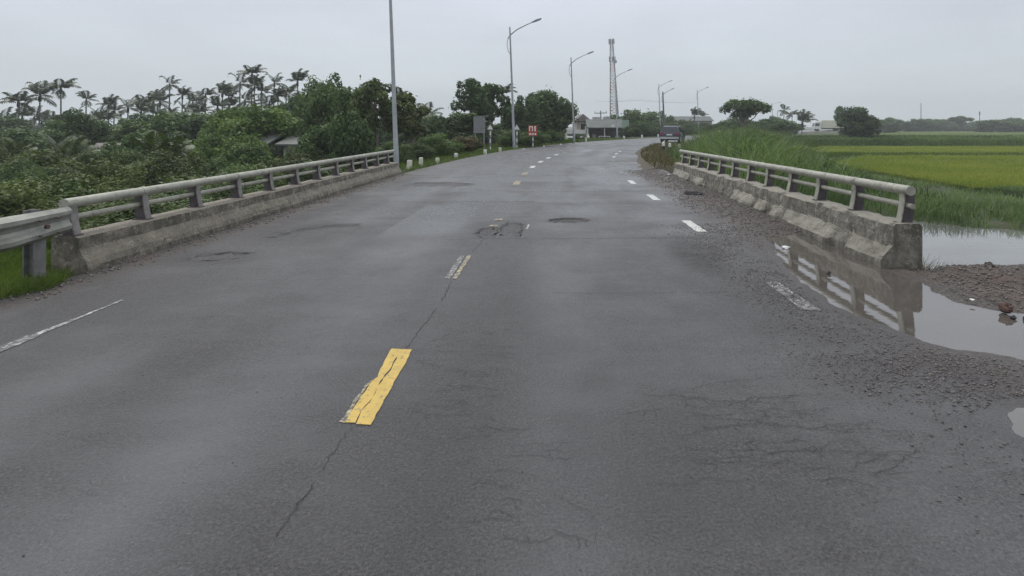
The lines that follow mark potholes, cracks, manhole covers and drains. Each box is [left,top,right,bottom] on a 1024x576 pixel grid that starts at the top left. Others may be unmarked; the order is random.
crack [629,372,933,489]
pothole [474,227,498,238]
crack [454,424,597,548]
crack [276,238,485,538]
pothole [498,222,524,237]
